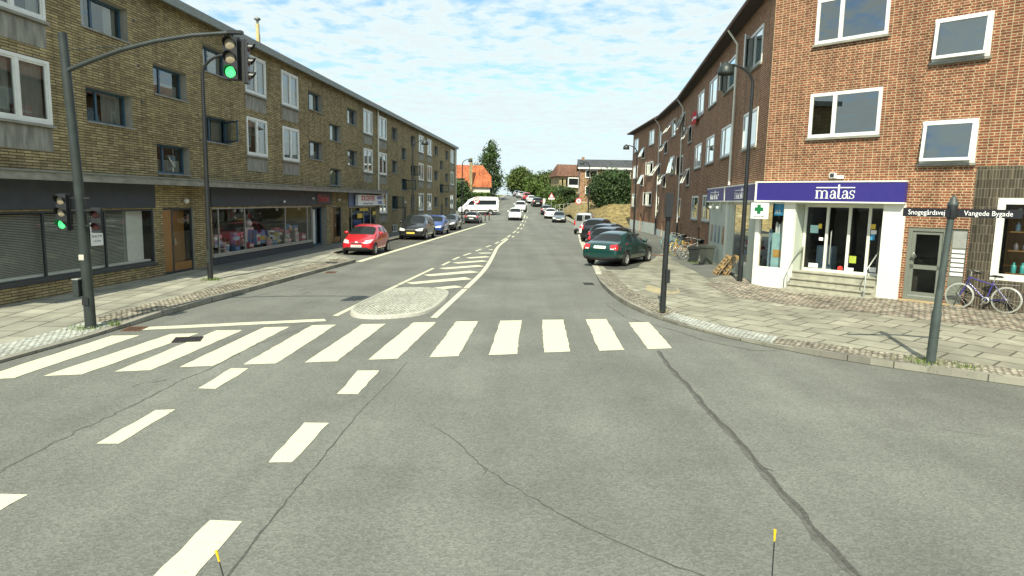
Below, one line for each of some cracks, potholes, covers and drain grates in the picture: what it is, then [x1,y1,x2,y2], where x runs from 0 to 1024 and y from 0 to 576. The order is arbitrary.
crack [227,362,407,576]
crack [432,424,705,576]
